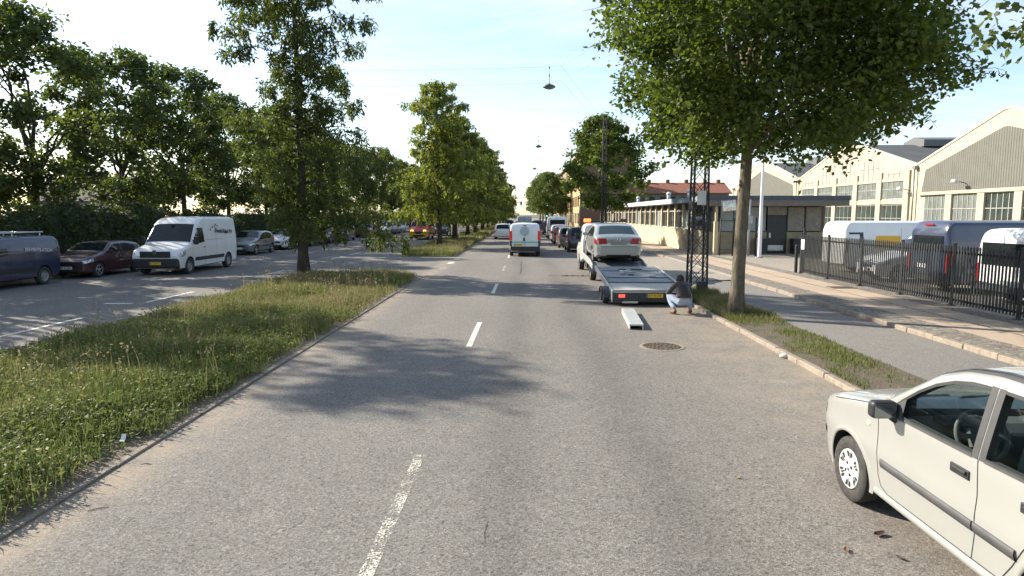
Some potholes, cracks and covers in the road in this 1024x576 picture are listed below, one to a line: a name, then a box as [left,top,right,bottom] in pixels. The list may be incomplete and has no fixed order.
manhole cover [640,342,685,351]
